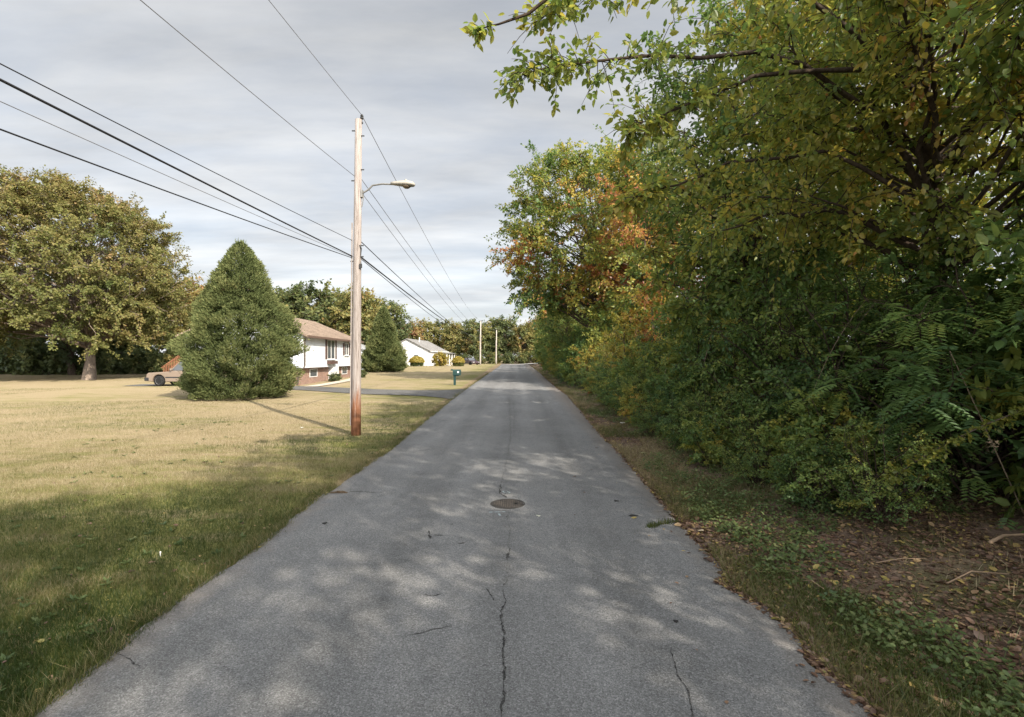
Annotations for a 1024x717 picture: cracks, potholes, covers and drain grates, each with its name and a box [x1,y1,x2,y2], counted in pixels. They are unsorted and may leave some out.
crack [670,651,694,717]
manhole cover [490,499,525,509]
crack [486,397,515,717]
